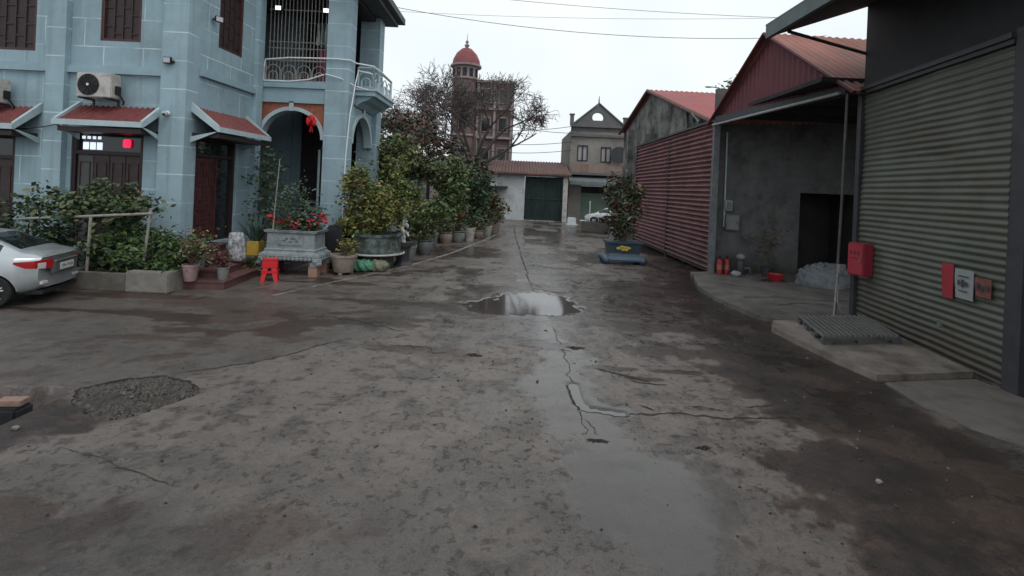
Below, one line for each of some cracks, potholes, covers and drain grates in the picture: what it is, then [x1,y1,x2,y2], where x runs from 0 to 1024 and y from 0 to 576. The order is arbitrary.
crack [181,316,451,373]
crack [514,229,560,293]
pothole [54,371,214,429]
crack [531,330,598,435]
crack [597,368,667,385]
crack [61,447,177,486]
